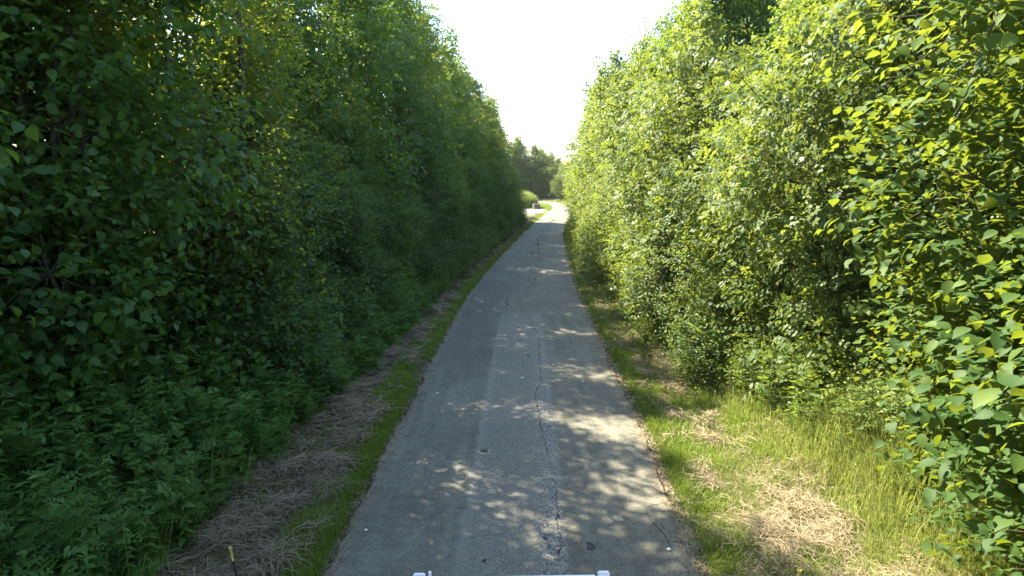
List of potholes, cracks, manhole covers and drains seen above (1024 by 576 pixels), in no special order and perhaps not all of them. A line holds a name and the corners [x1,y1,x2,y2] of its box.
crack [528,317,565,561]
